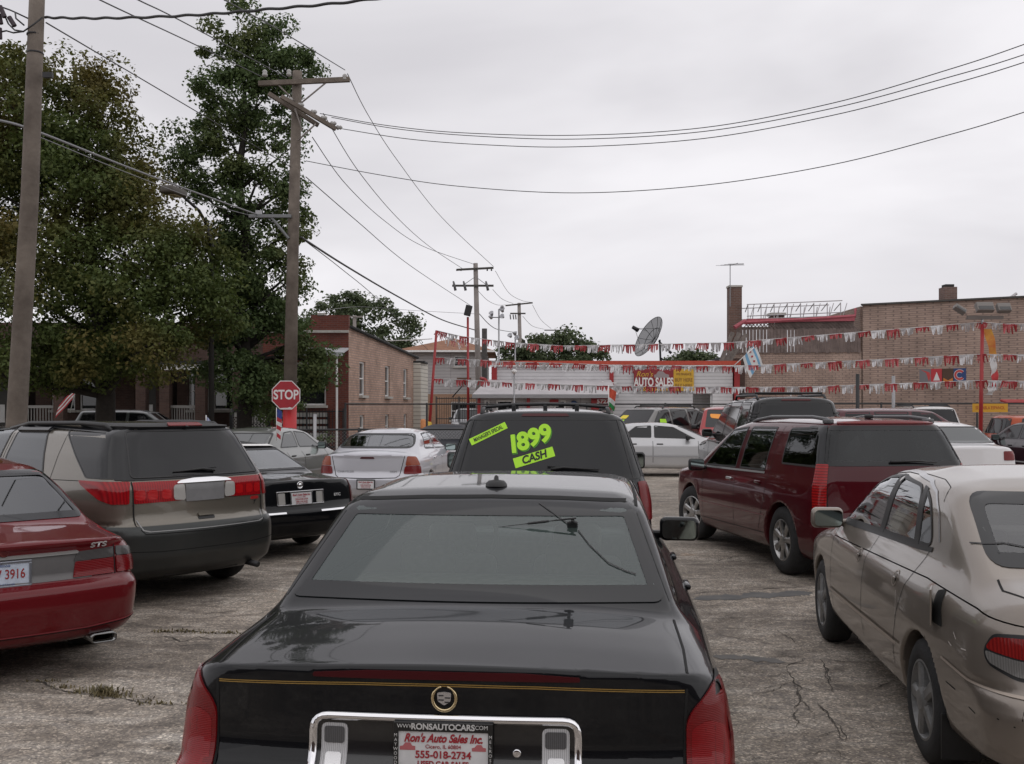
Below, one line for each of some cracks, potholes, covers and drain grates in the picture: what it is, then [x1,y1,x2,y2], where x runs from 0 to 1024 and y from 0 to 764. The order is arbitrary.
crack [742,658,860,760]
